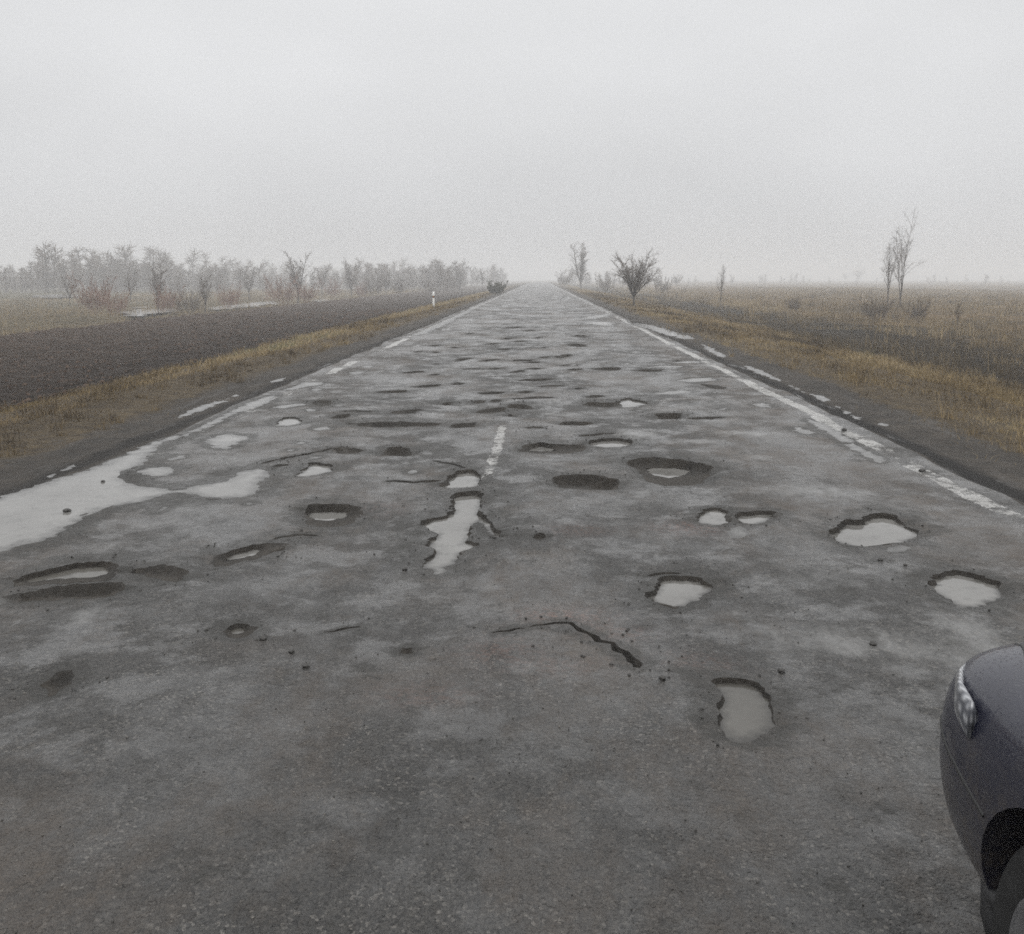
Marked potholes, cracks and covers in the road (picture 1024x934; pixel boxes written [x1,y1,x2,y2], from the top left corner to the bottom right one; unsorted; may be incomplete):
pothole [223,623,259,638]
pothole [626,457,715,486]
pothole [644,575,713,609]
pothole [439,469,482,488]
pothole [13,561,122,587]
pothole [209,543,289,567]
pothole [696,507,732,526]
pothole [420,491,502,574]
pothole [615,398,648,407]
pothole [735,510,777,524]
pothole [828,513,919,546]
pothole [927,570,1002,608]
